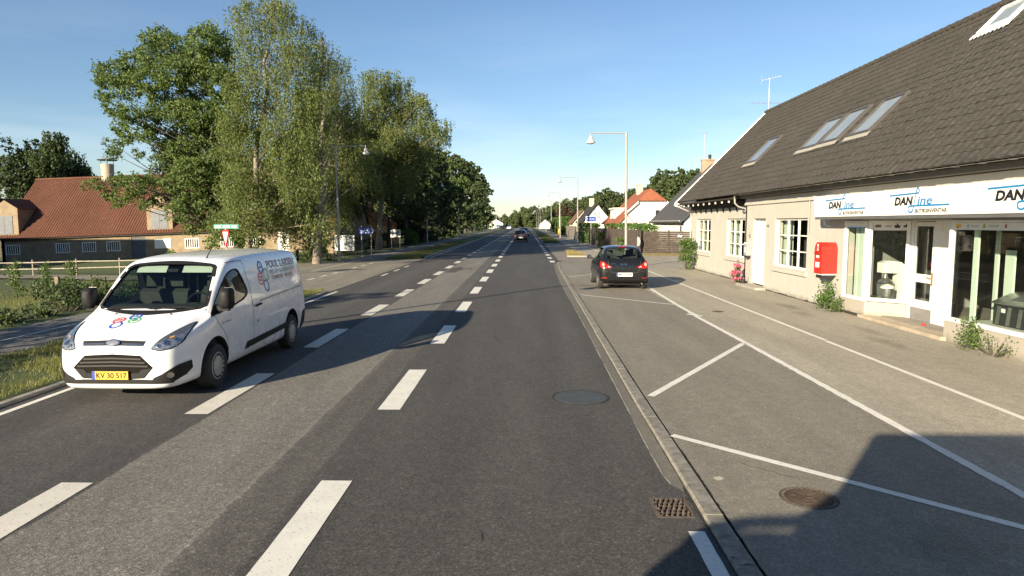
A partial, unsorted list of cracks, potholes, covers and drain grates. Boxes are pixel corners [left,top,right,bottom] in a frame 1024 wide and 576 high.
crack [734,460,797,478]
drain grate [649,498,696,518]
manhole cover [552,390,610,405]
manhole cover [779,487,840,510]
